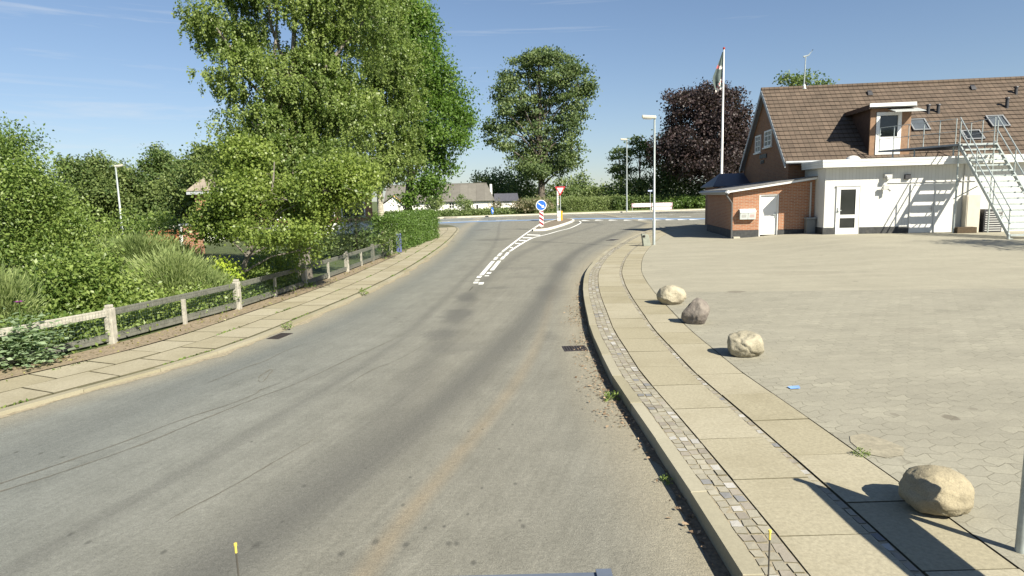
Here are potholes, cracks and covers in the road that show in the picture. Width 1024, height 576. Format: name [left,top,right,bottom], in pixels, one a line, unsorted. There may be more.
crack [169,435,320,520]
crack [0,336,427,492]
